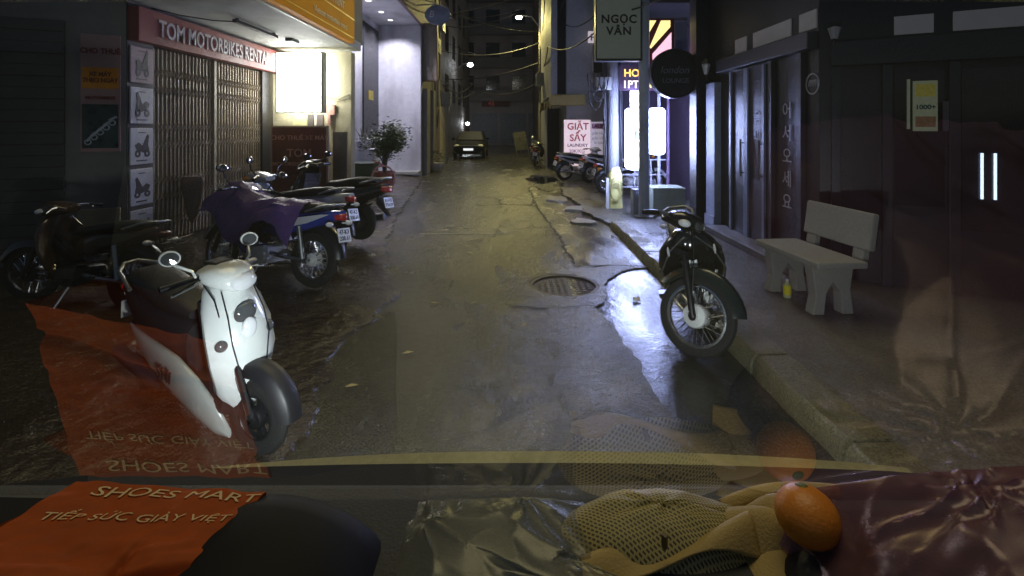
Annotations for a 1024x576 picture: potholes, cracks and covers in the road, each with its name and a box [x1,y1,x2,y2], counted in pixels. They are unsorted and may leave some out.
manhole cover [529,274,599,297]
pothole [526,175,560,184]
